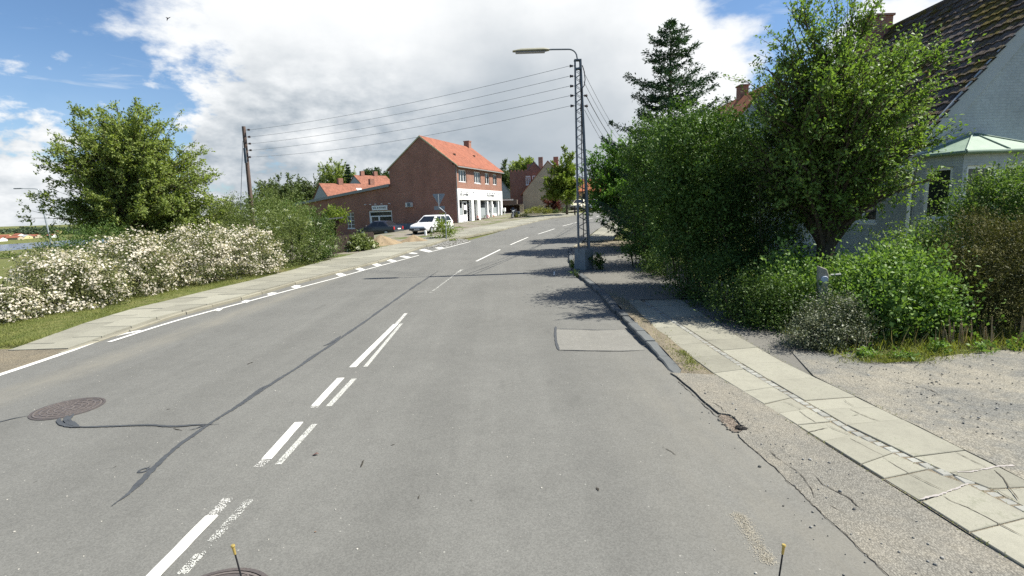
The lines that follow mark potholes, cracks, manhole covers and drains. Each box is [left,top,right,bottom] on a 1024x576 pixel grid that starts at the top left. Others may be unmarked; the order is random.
manhole cover [28,397,106,421]
crack [676,377,723,416]
manhole cover [202,568,268,576]
pothole [718,414,748,433]
crack [746,443,888,575]
